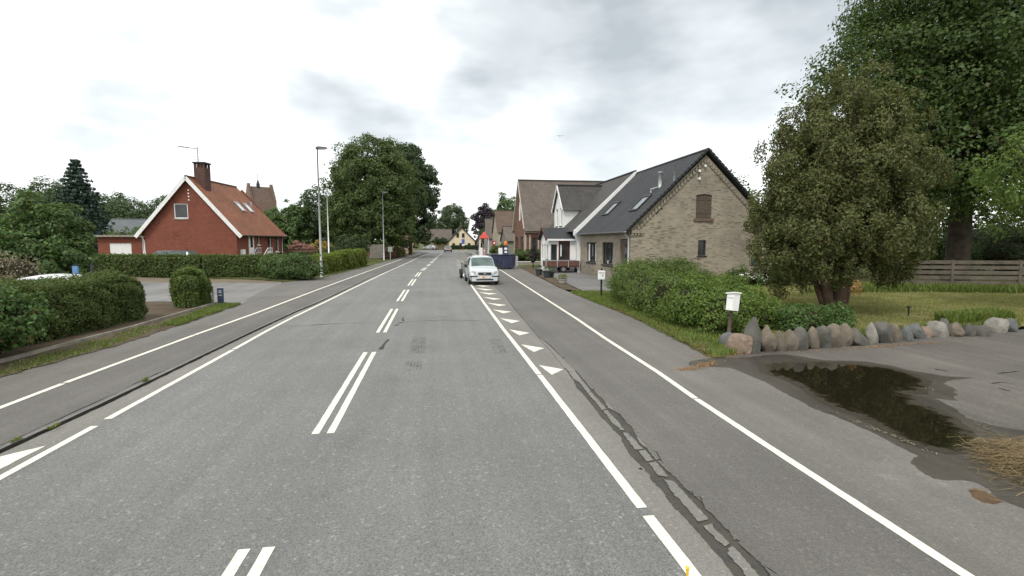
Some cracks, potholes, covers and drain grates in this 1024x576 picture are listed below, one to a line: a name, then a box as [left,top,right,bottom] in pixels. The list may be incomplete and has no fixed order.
pothole [968,488,1003,504]
